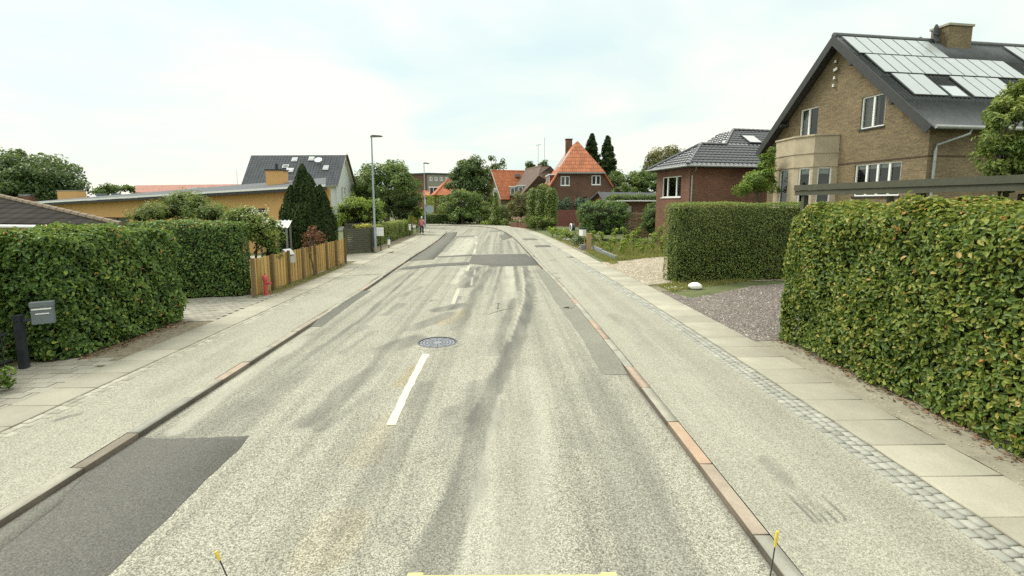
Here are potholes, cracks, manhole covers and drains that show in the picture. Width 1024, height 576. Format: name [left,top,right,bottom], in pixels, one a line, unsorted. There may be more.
manhole cover [417,337,457,348]
